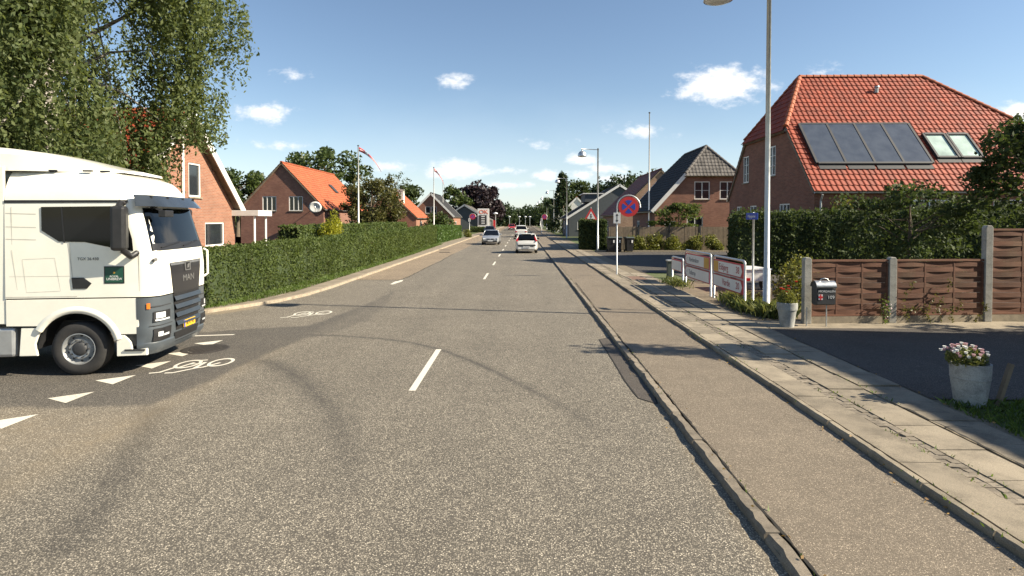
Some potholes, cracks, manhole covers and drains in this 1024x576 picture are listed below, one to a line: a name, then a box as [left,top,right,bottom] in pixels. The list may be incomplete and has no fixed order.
crack [900,406,1024,467]
